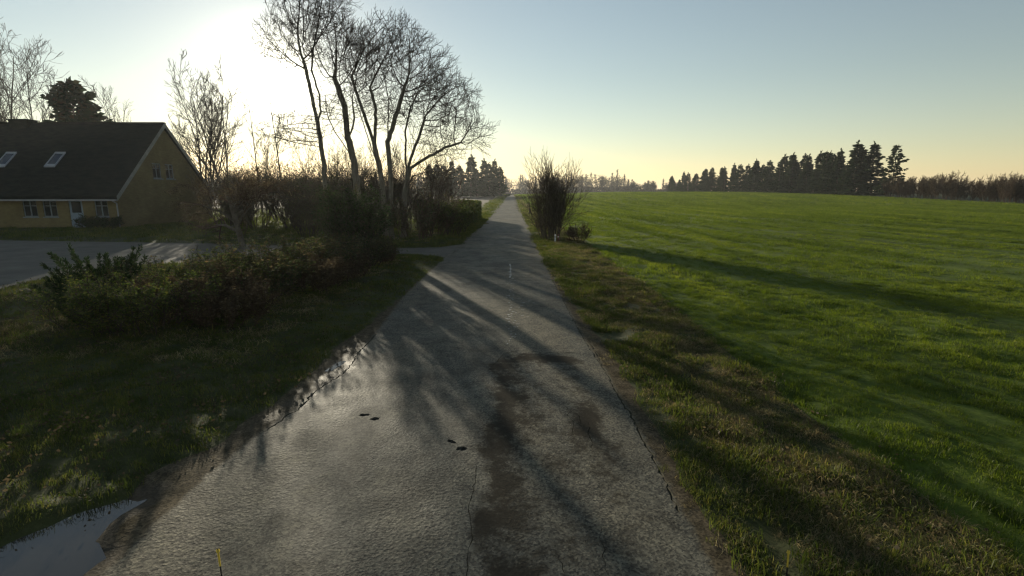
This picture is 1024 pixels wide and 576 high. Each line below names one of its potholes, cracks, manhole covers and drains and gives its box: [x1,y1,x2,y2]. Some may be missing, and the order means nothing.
crack [466,466,477,576]
crack [262,334,376,433]
